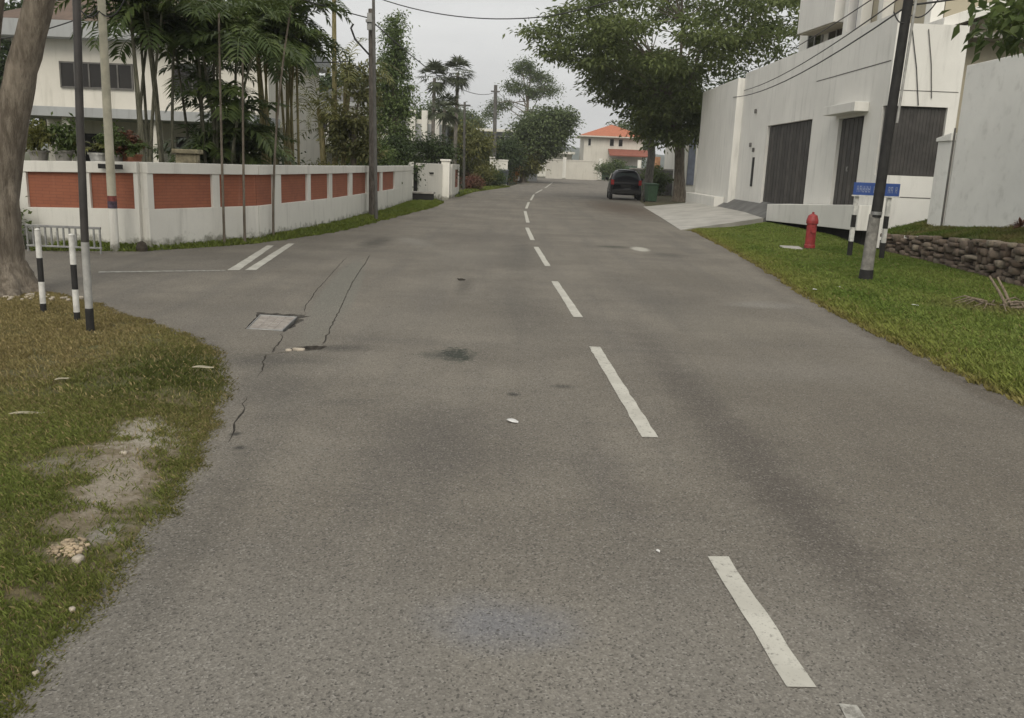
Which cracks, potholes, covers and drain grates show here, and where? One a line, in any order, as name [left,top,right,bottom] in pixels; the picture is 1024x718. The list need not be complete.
crack [251,256,369,377]
crack [229,398,247,441]
manhole cover [245,312,309,332]
